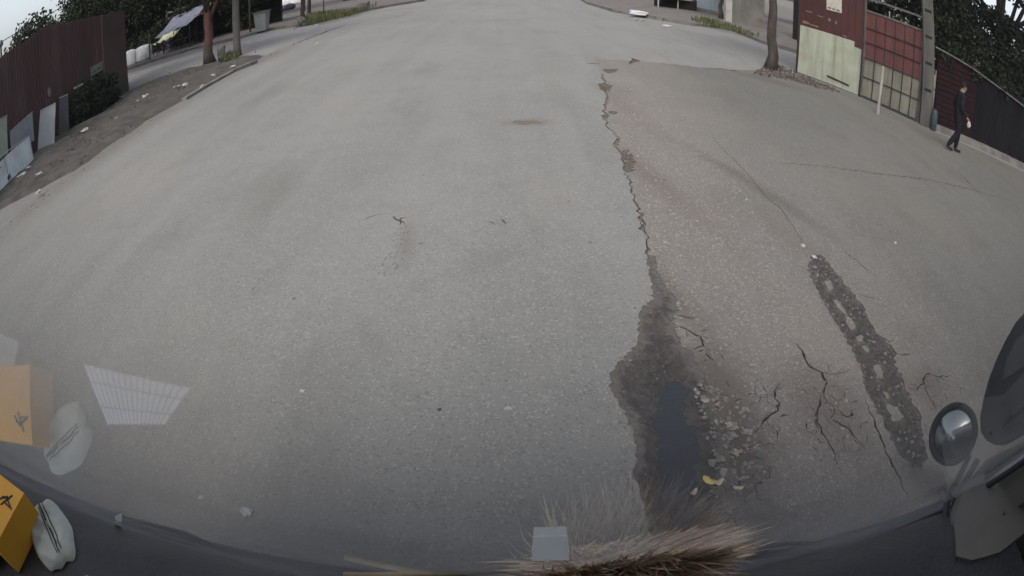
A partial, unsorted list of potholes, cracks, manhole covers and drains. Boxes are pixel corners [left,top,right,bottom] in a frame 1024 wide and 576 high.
crack [588,63,651,255]
crack [674,315,724,365]
pothole [609,255,732,535]
crack [882,337,961,409]
crack [716,343,868,520]
crack [785,163,1021,211]
crack [358,214,409,275]
